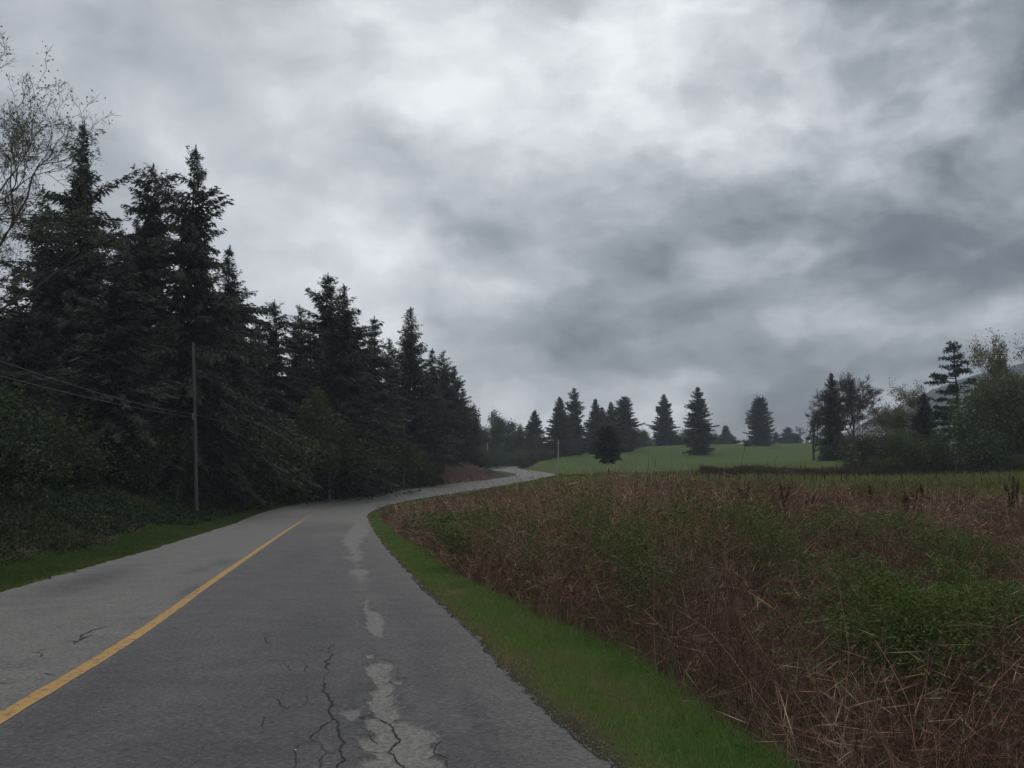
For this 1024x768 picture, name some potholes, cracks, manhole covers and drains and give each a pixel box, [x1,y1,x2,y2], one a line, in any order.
crack [253,645,405,768]
